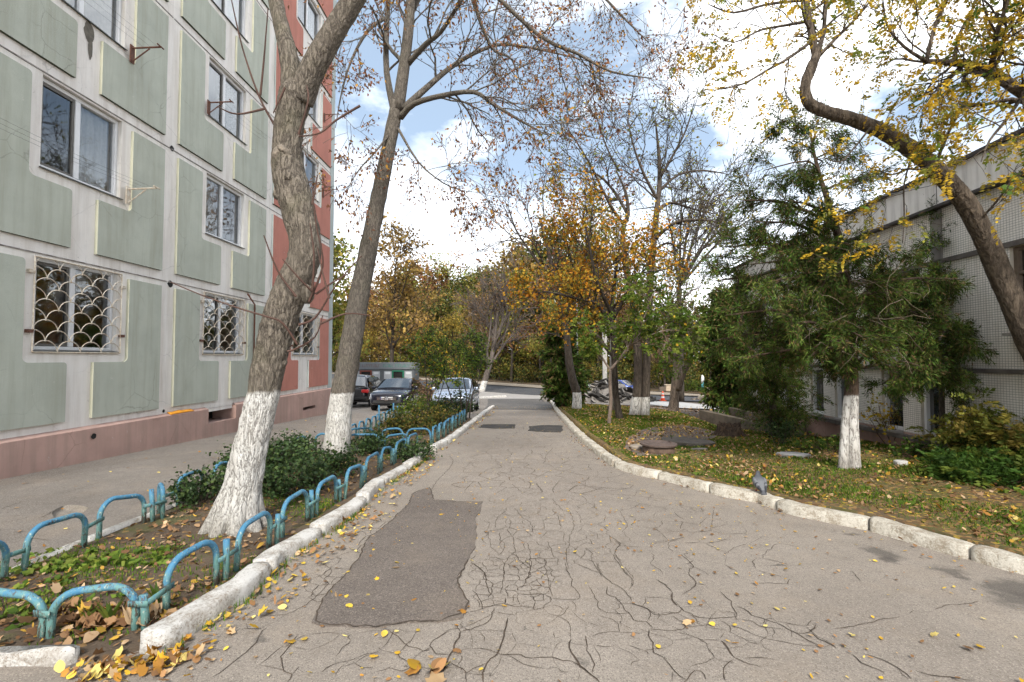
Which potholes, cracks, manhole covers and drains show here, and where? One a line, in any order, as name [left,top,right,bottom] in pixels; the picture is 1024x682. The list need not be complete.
crack [841,601,977,628]
crack [195,428,836,682]
crack [855,653,967,680]
manhole cover [661,435,715,448]
manhole cover [640,440,677,448]
manhole cover [642,446,675,455]
